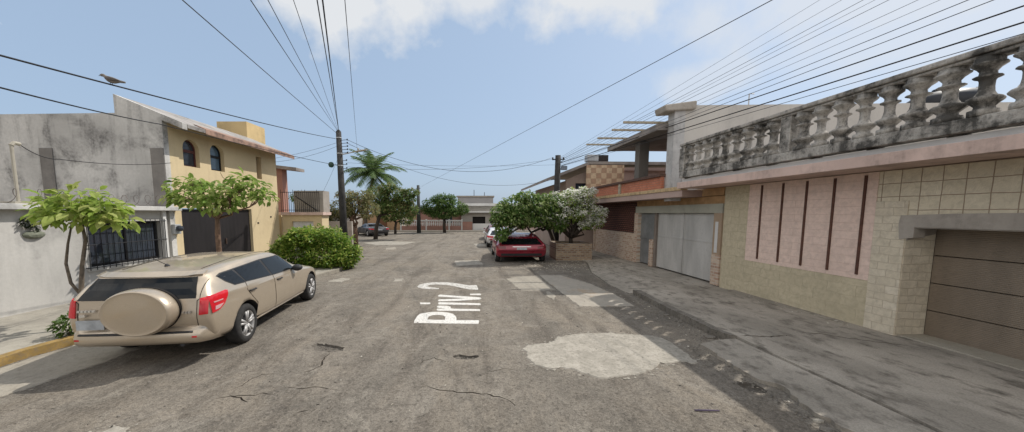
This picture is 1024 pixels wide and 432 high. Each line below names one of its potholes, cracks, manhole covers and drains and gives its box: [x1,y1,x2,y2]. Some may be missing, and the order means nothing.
crack [212,353,338,402]
pothole [312,343,345,352]
crack [424,386,513,403]
